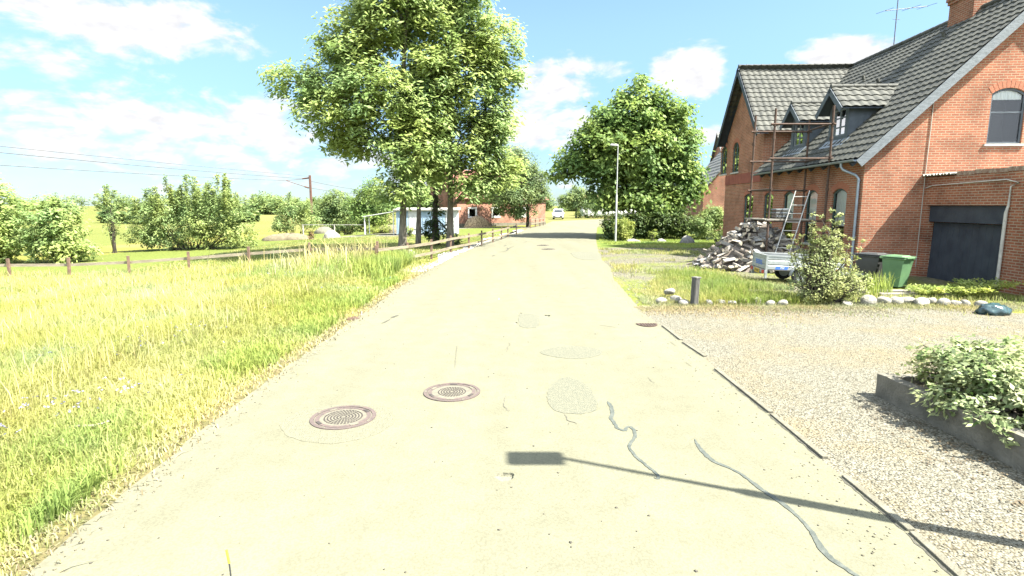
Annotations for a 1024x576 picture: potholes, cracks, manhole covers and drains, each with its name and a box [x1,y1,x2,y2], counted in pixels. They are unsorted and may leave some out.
pothole [493,472,514,481]
manhole cover [424,383,480,402]
manhole cover [309,405,376,430]
